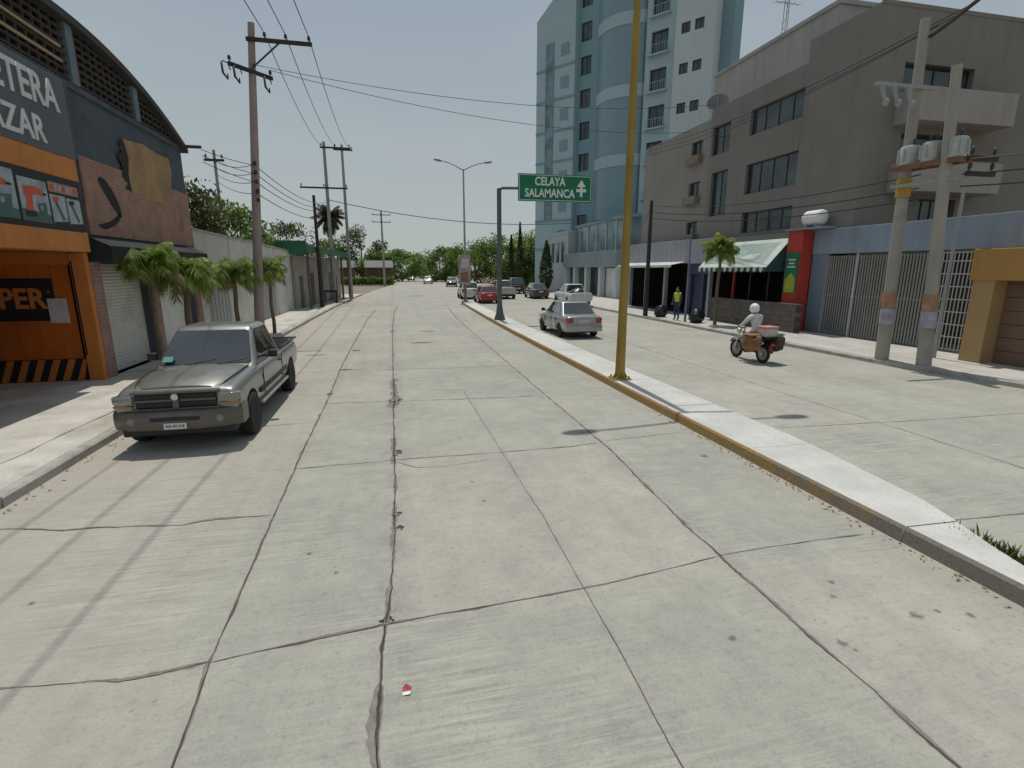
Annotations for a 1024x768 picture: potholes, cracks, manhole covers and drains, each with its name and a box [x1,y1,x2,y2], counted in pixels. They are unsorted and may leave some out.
crack [0,305,1024,768]
